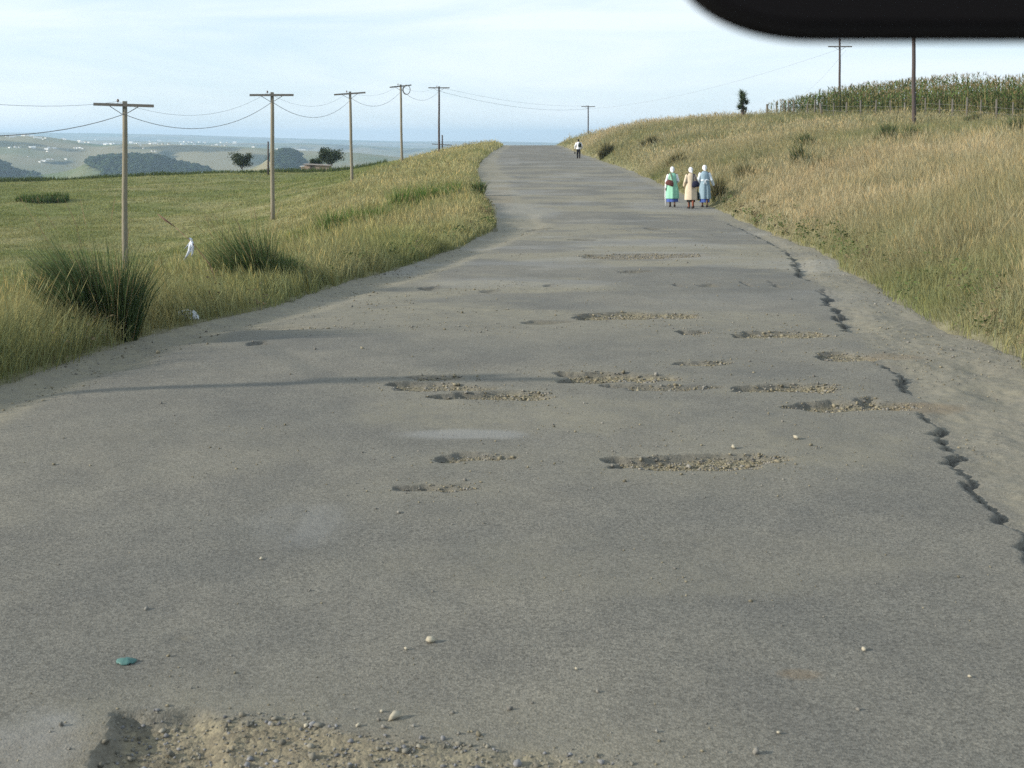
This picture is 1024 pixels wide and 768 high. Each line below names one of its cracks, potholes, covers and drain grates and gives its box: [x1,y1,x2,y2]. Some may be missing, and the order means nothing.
pothole [599,451,801,472]
pothole [728,381,850,394]
pothole [776,399,930,413]
pothole [851,395,885,408]
pothole [383,381,504,392]
pothole [431,451,524,464]
pothole [570,311,706,321]
pothole [729,330,843,339]
